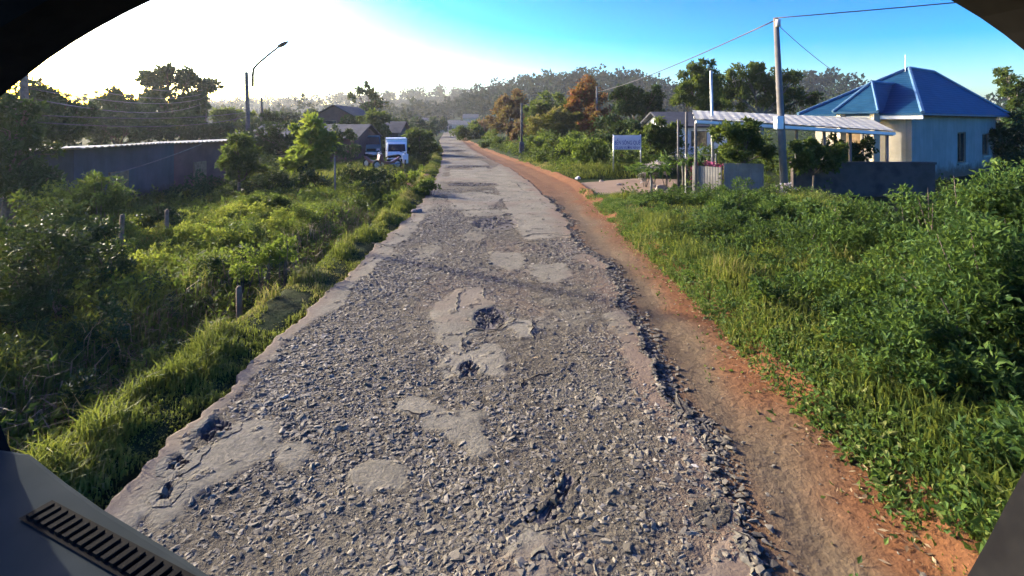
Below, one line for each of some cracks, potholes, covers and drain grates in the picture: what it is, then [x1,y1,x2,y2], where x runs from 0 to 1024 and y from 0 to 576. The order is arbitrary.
pothole [451,356,486,380]
pothole [147,474,186,507]
pothole [524,465,580,531]
pothole [189,414,242,448]
pothole [155,449,201,477]
pothole [467,304,515,332]
